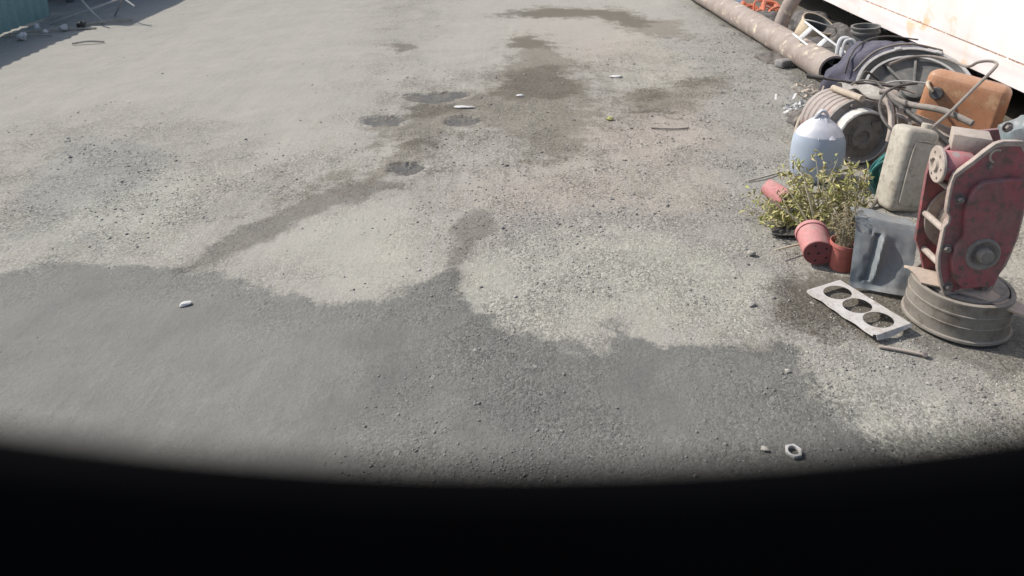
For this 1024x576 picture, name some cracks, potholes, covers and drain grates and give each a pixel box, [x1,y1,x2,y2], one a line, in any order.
pothole [346,110,422,132]
pothole [430,111,496,131]
pothole [371,157,443,183]
pothole [390,88,485,108]
